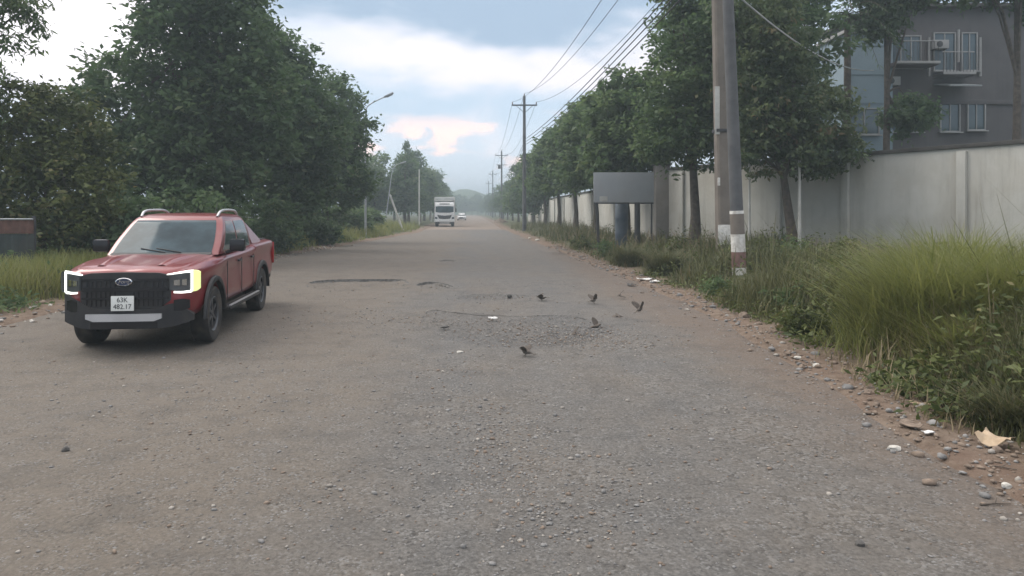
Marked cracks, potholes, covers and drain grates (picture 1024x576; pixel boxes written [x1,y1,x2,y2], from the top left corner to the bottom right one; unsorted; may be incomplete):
pothole [420,310,613,349]
pothole [307,279,409,292]
